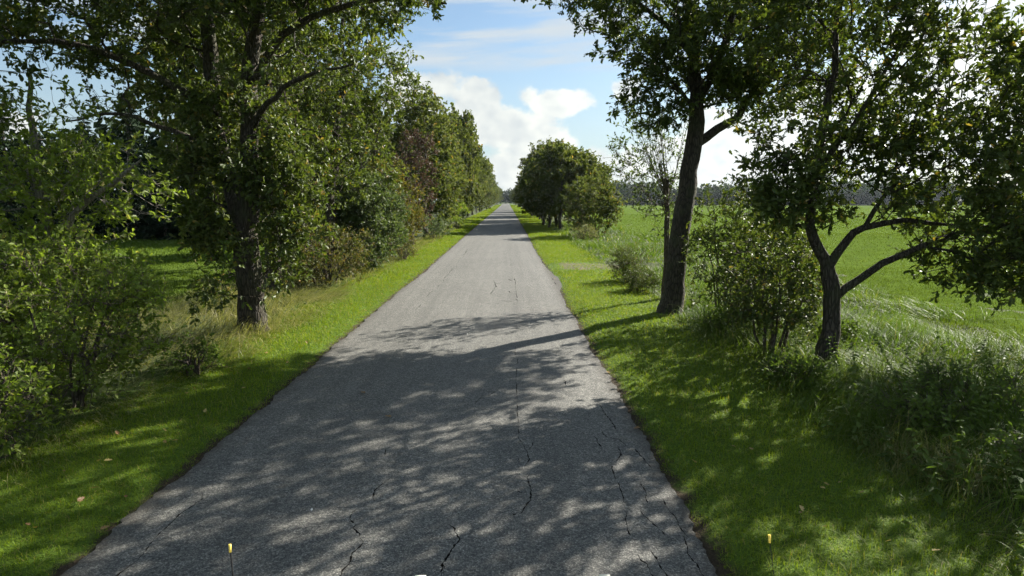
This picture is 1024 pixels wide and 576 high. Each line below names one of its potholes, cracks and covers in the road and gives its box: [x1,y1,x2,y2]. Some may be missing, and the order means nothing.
crack [583,405,704,576]
crack [441,525,460,576]
crack [340,511,364,576]
crack [513,346,533,515]
